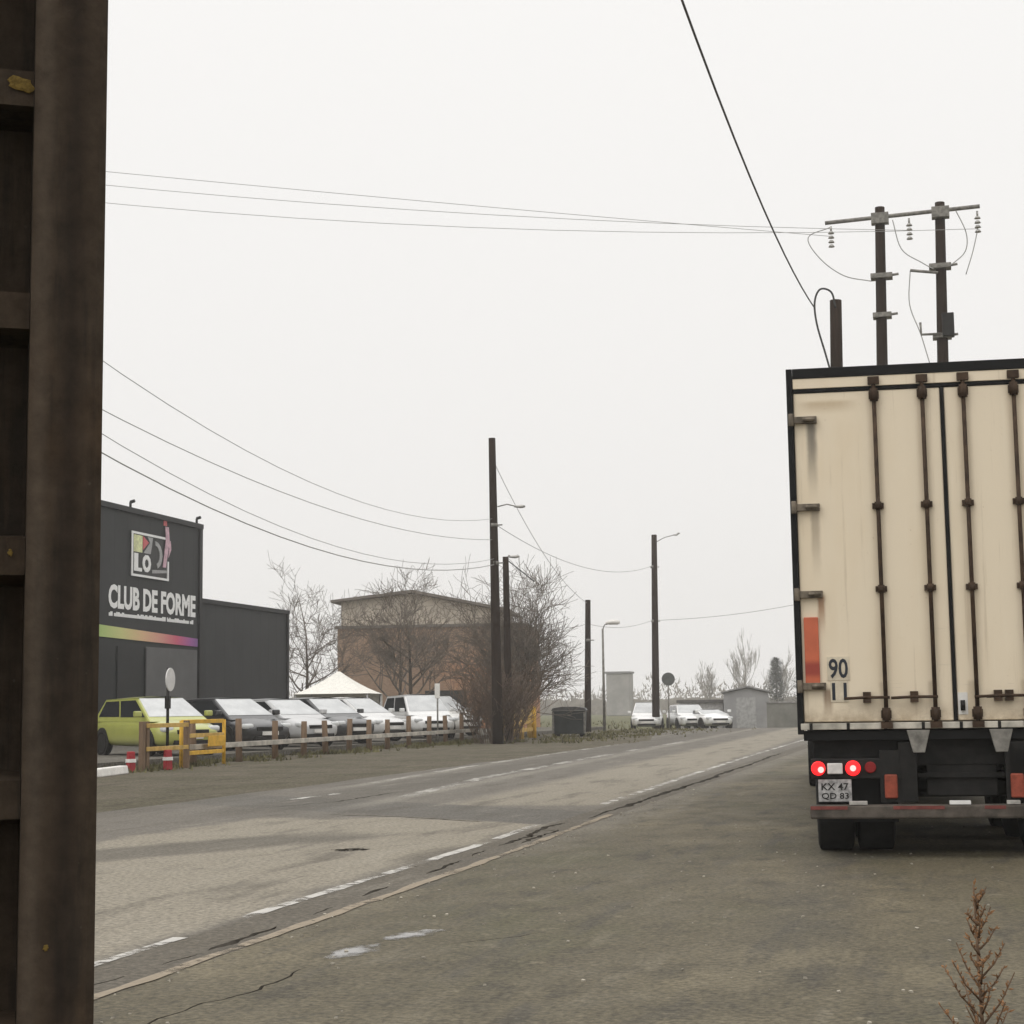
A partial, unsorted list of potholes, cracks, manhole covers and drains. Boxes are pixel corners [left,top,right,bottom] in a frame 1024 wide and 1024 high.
crack [94,823,563,985]
crack [148,968,303,1024]
